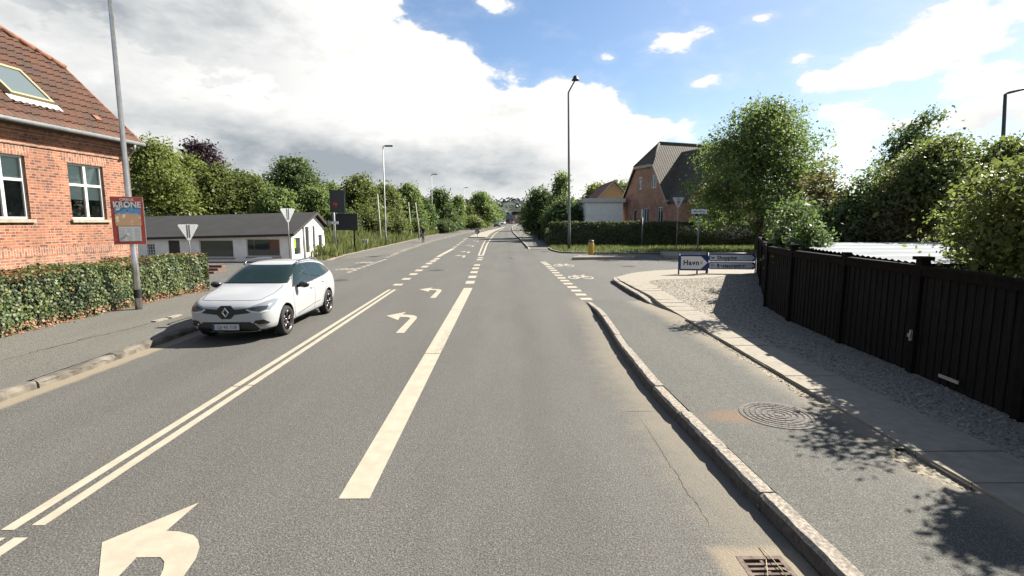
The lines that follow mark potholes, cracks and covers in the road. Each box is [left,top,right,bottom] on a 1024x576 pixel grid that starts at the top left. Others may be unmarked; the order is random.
drain grate [736,556,797,576]
crack [643,423,714,533]
manhole cover [739,402,821,430]
